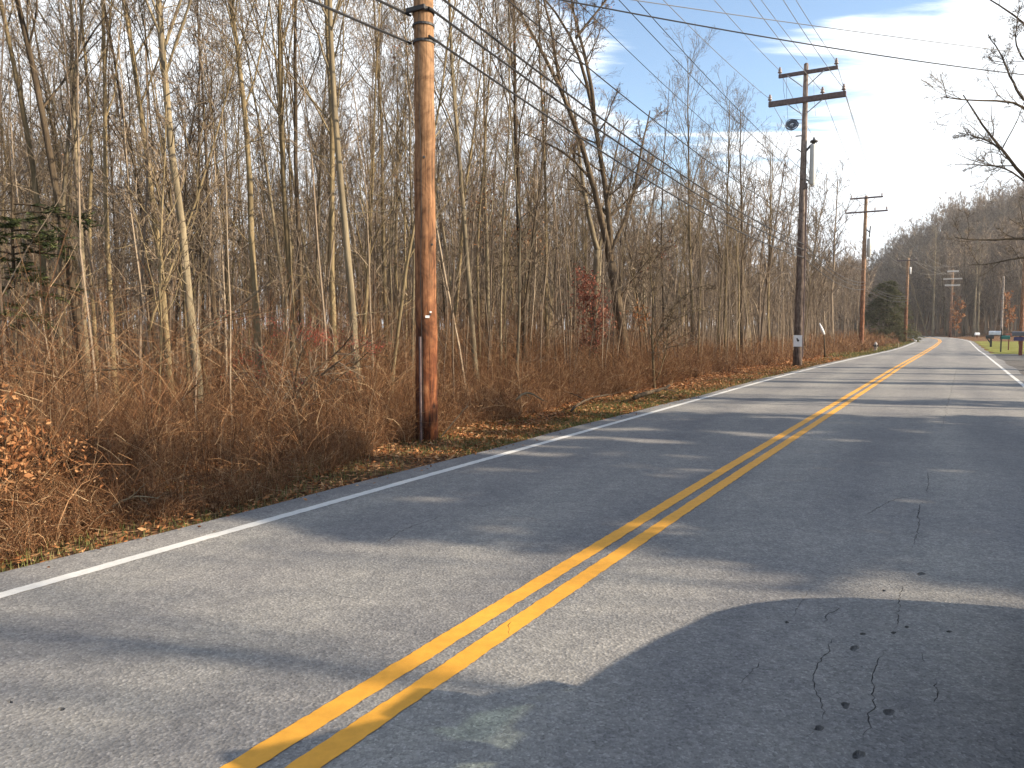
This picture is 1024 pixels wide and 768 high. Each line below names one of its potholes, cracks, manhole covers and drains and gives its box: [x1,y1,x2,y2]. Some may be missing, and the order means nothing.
crack [861,586,903,768]
crack [809,608,848,735]
crack [866,474,931,549]
